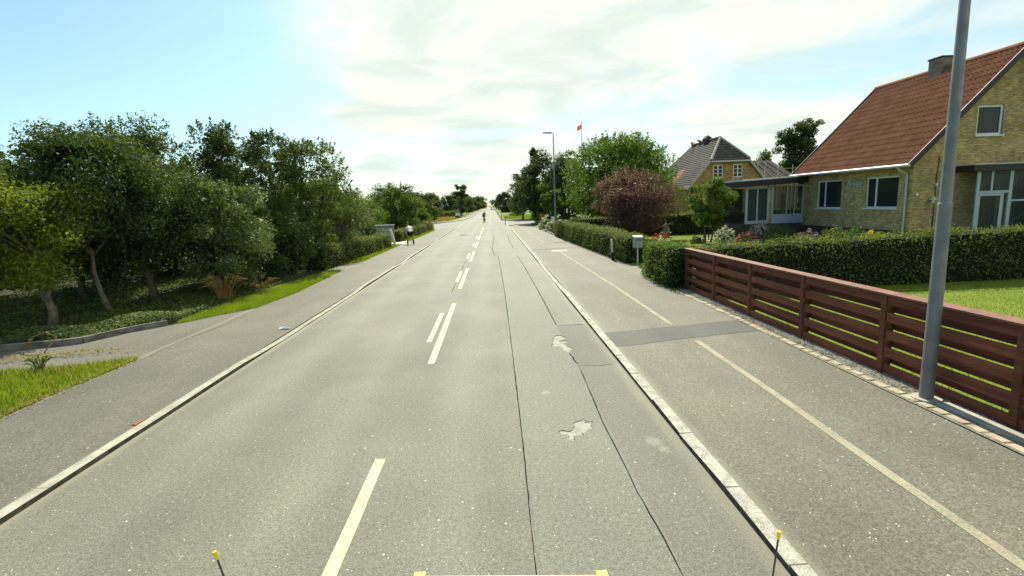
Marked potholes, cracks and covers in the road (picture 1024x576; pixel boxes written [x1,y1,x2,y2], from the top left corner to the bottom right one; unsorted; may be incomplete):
pothole [551,335,573,352]
pothole [558,419,593,441]
